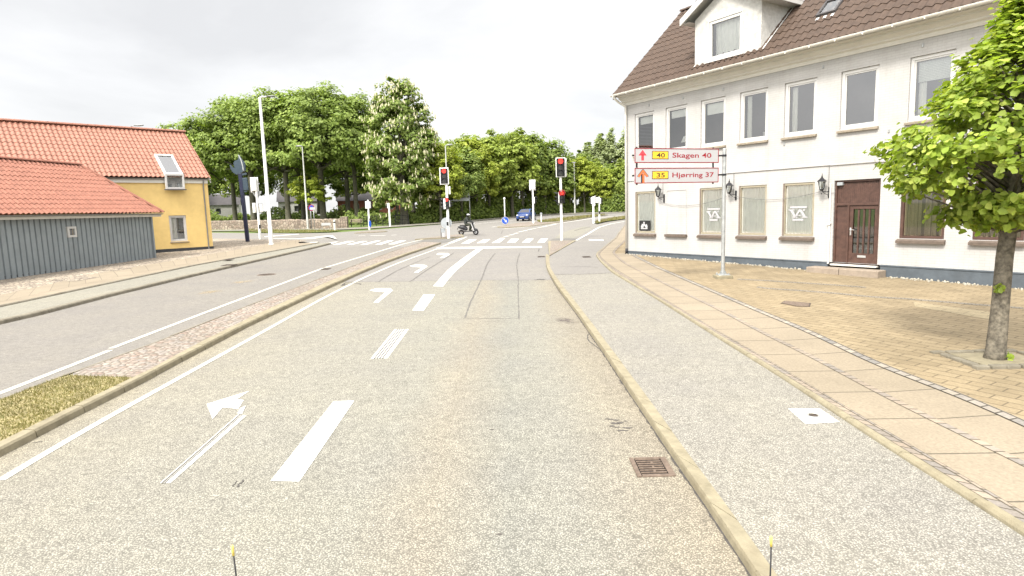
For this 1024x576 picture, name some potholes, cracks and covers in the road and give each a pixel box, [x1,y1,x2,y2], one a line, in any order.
drain grate [629,457,676,478]
